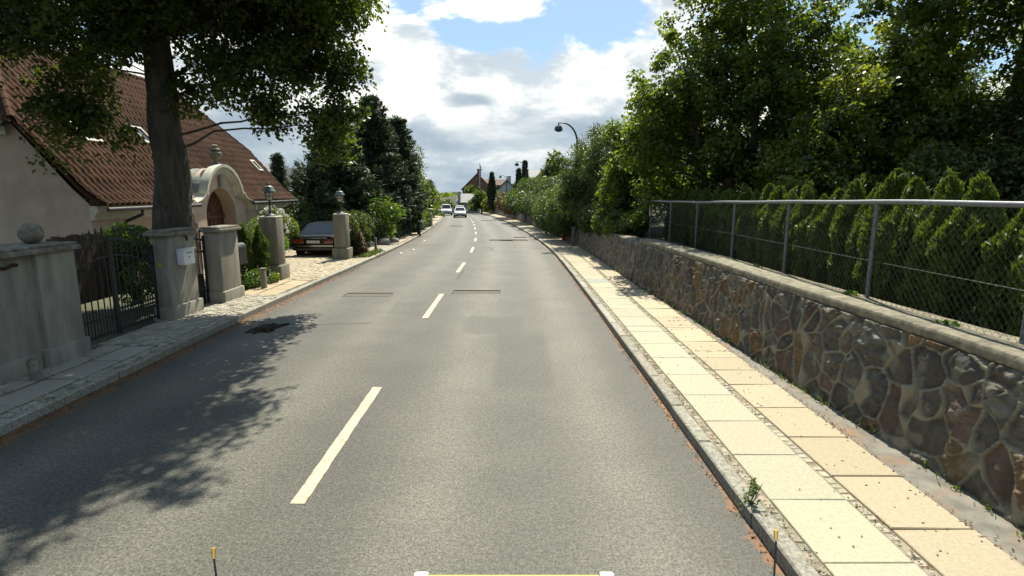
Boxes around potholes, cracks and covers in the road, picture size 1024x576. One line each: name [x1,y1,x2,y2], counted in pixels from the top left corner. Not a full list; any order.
pothole [245,323,289,334]
